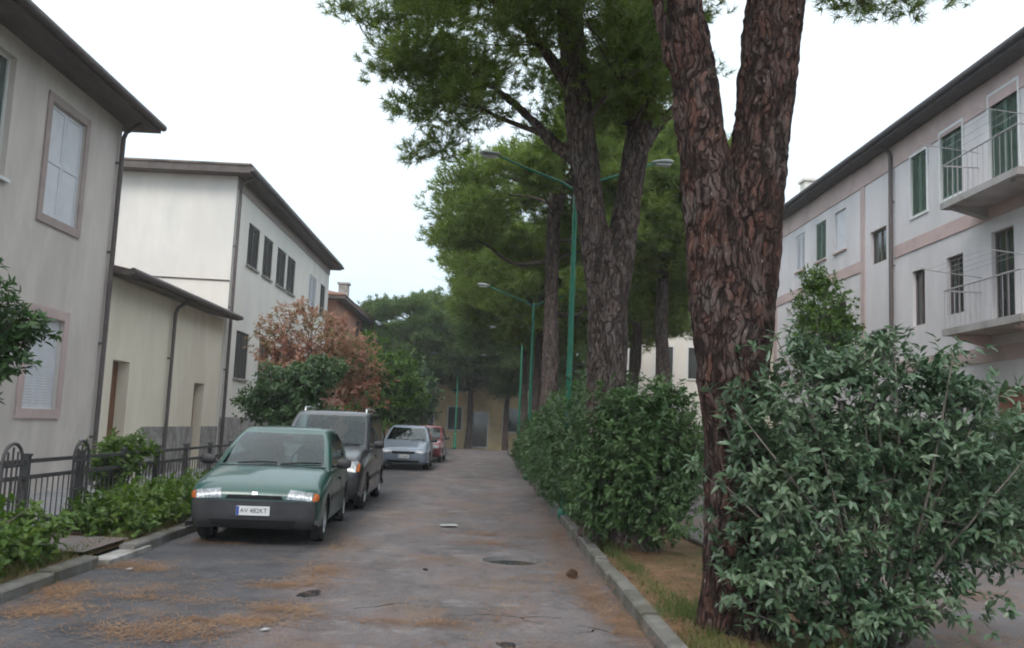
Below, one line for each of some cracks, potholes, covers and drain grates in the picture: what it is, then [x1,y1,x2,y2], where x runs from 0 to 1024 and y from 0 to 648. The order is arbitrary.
manhole cover [480,556,546,566]
pothole [296,589,322,598]
crack [465,614,563,624]
